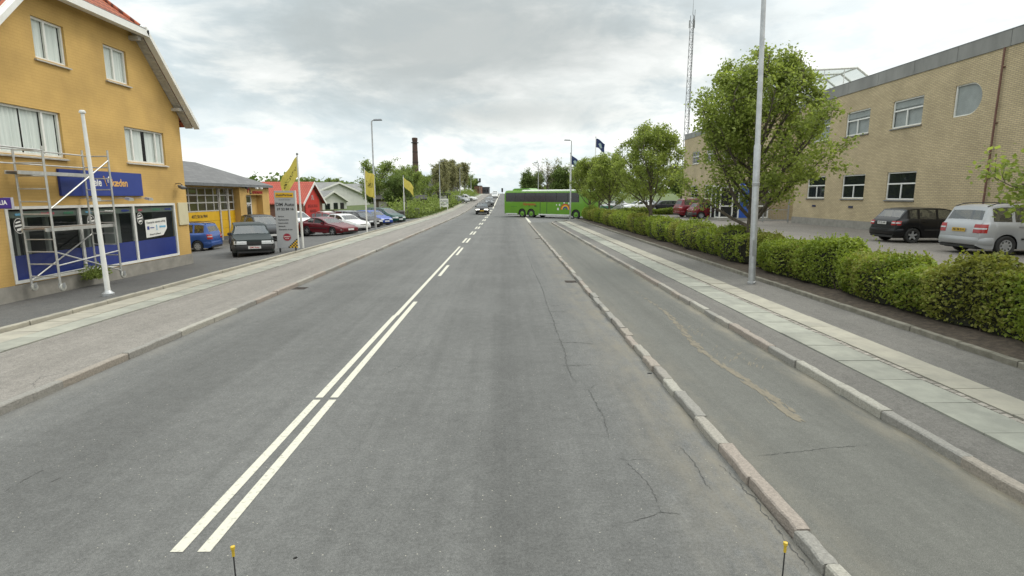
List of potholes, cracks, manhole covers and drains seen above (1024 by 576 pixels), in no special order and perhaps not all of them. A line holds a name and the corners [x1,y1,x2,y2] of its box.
crack [673,444,809,569]
crack [524,245,609,437]
crack [620,458,677,523]
